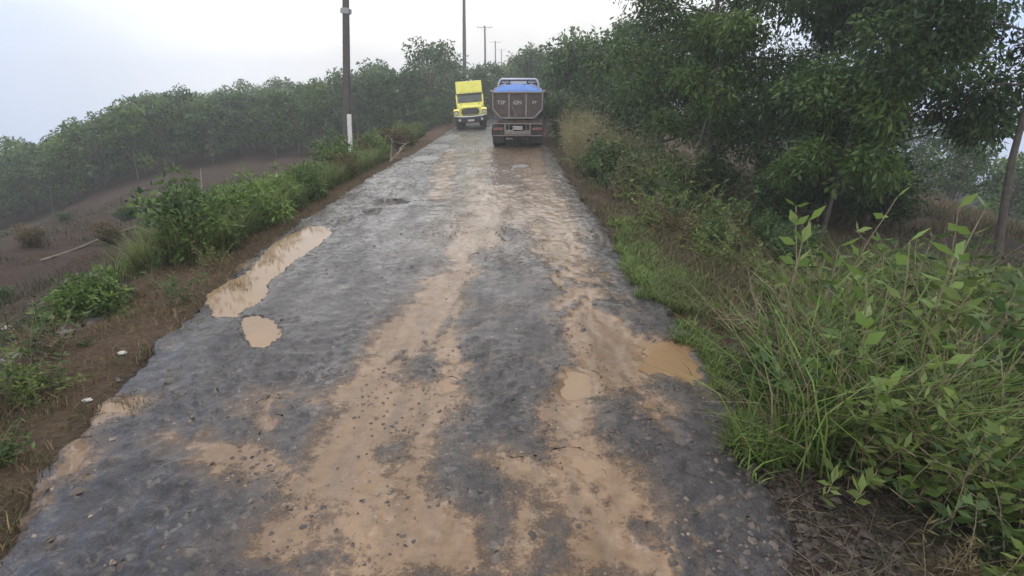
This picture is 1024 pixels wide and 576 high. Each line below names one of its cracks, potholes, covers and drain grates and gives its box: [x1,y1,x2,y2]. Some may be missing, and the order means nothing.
pothole [552,363,603,404]
pothole [370,198,411,206]
pothole [638,336,709,387]
pothole [199,226,334,318]
pothole [238,314,284,349]
